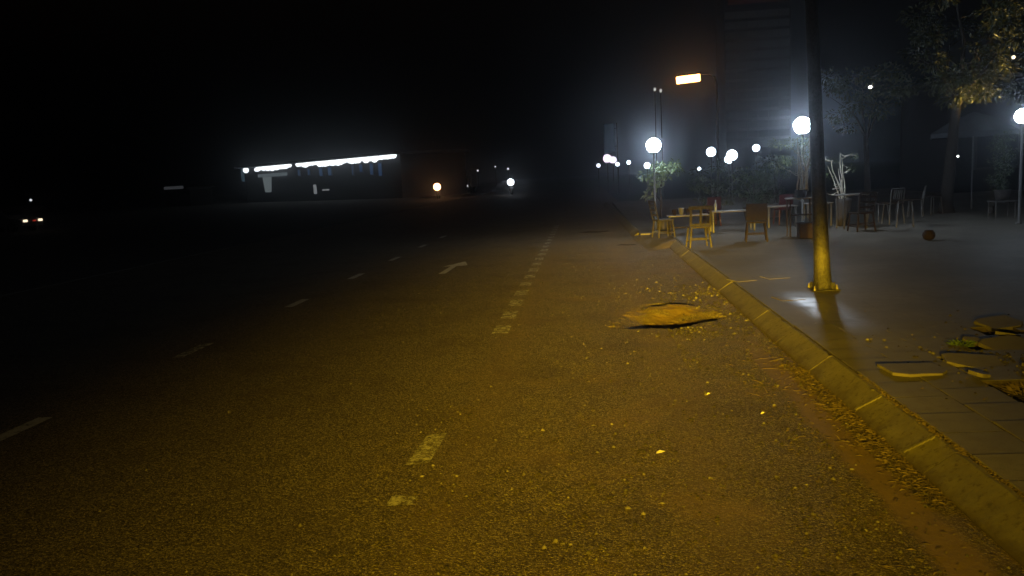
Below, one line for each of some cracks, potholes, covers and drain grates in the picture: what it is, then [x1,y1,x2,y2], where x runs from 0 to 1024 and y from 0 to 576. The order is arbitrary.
pothole [608,302,727,329]
